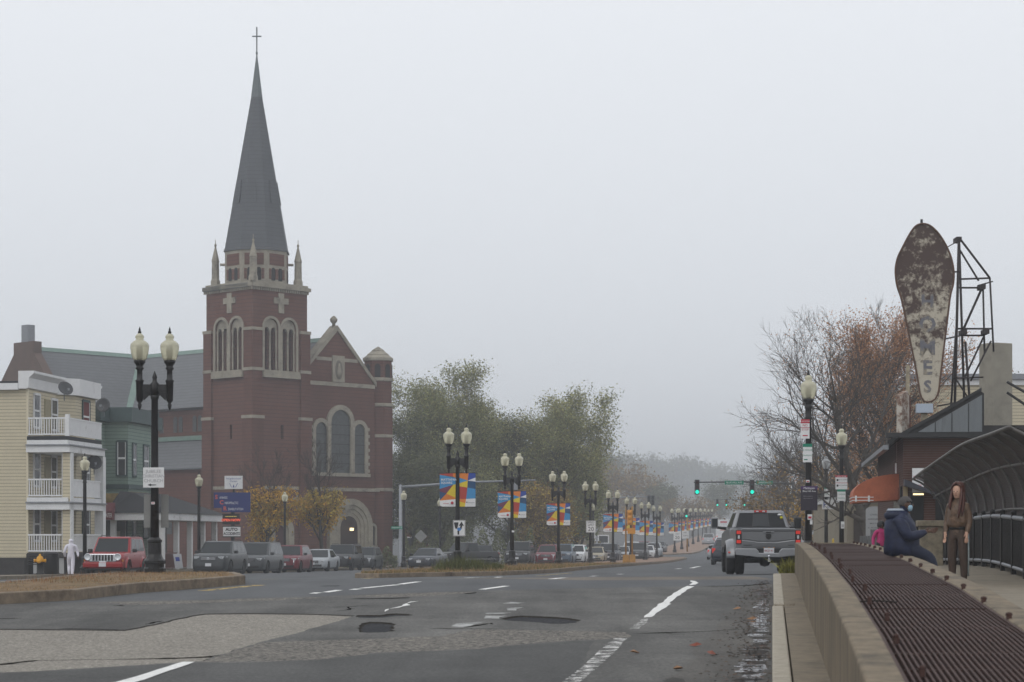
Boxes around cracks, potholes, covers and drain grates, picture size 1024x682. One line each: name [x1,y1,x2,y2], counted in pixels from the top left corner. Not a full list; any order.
drain grate [809,541,1024,682]
pothole [502,616,580,624]
pothole [358,622,396,633]
